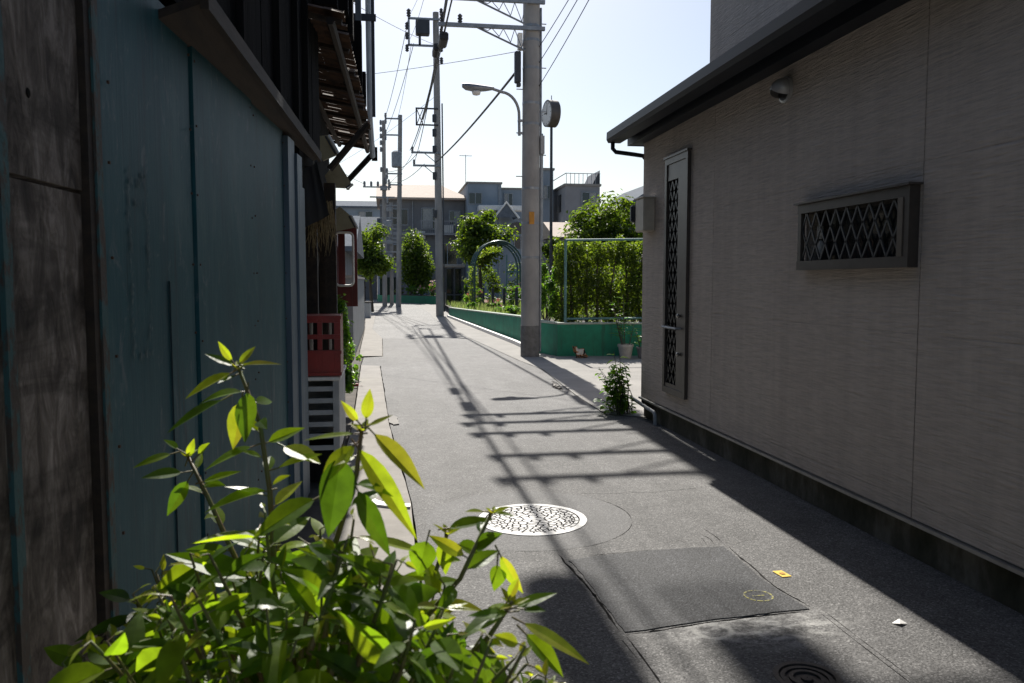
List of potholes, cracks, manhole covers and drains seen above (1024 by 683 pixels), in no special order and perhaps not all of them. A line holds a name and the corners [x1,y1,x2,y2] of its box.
manhole cover [479,504,587,536]
manhole cover [773,661,842,683]
